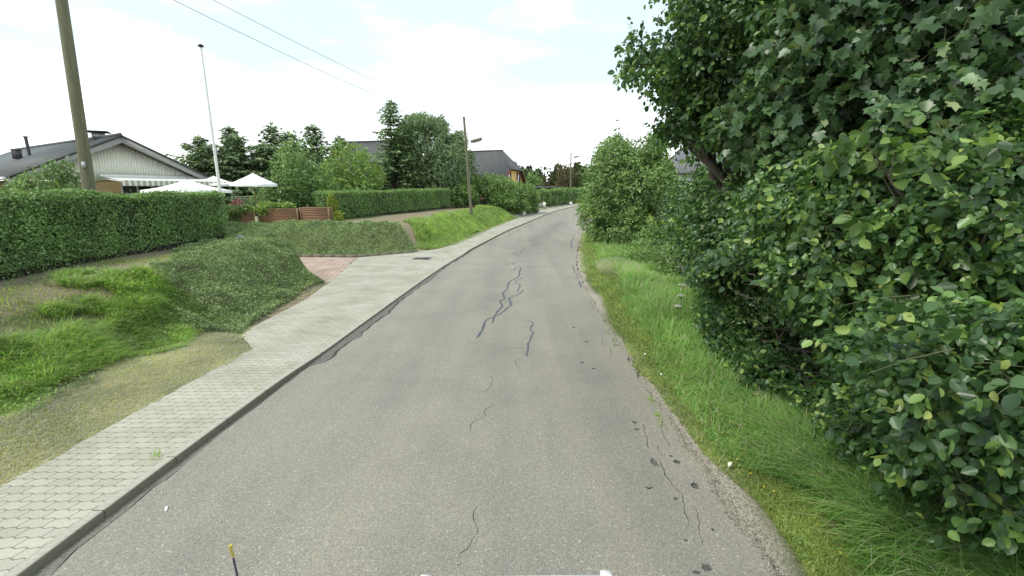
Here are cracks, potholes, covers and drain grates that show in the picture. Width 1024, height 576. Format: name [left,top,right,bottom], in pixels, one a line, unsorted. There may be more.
crack [643,421,703,545]
crack [476,260,524,370]
